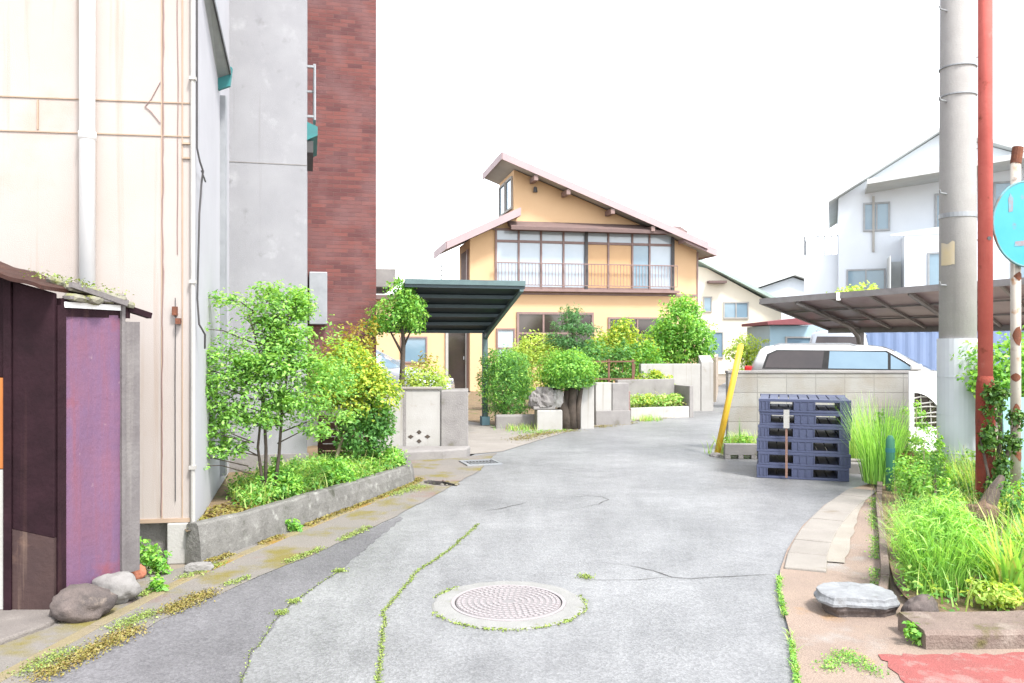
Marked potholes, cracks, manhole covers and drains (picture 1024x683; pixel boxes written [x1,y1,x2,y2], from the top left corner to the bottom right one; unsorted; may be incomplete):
manhole cover [432,581,588,632]
crack [612,563,766,580]
crack [239,571,340,683]
crack [373,503,523,683]
